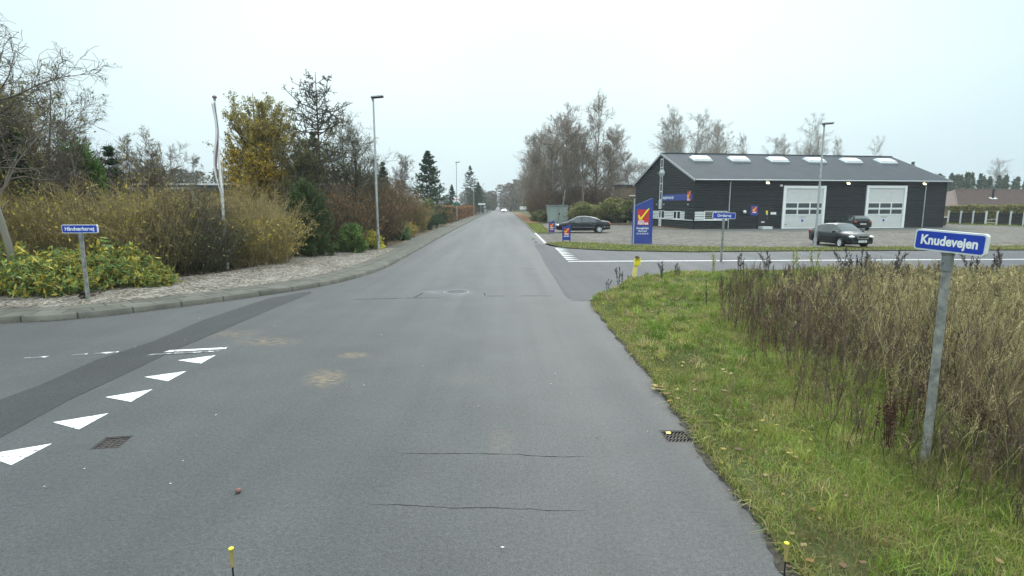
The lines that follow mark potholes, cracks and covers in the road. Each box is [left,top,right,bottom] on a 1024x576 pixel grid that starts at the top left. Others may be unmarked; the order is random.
drain grate [659,430,693,443]
